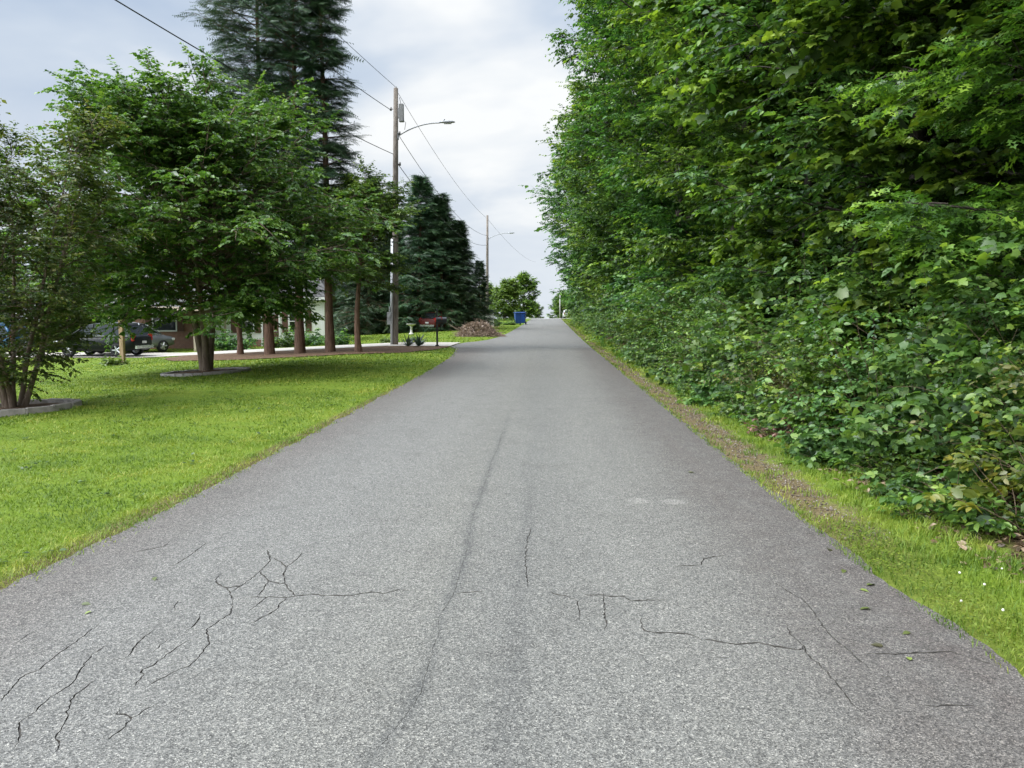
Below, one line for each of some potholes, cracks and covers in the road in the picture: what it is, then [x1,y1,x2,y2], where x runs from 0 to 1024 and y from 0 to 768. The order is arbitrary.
crack [109,550,397,739]
crack [640,583,996,716]
crack [1,628,106,752]
crack [553,593,665,629]
